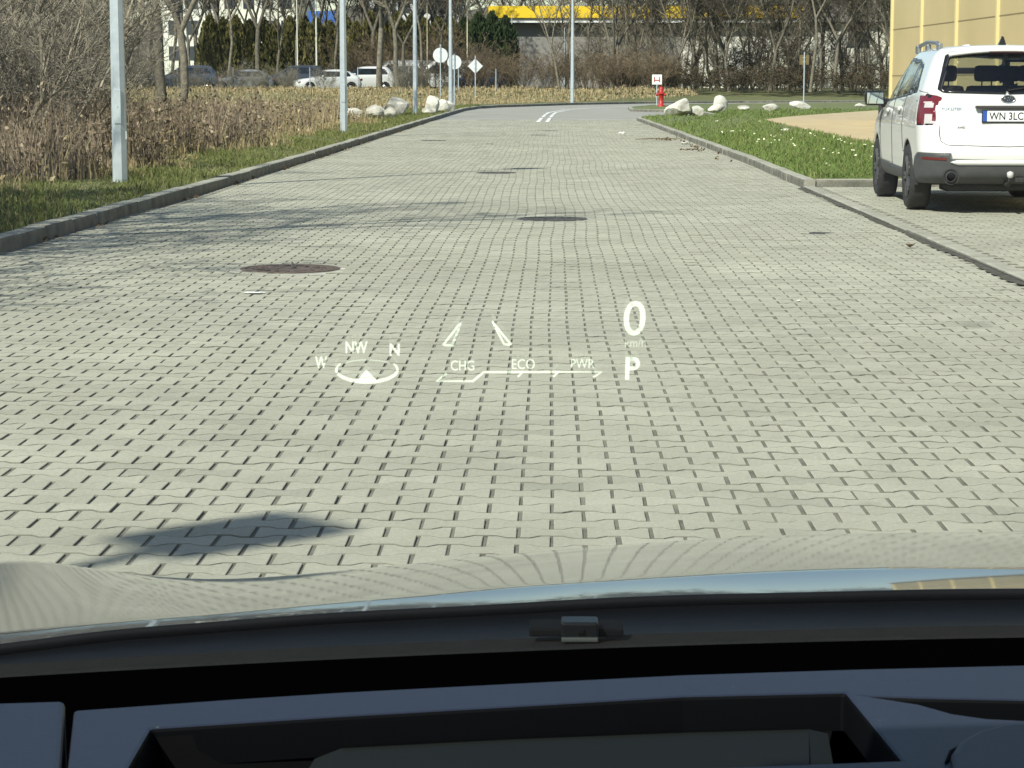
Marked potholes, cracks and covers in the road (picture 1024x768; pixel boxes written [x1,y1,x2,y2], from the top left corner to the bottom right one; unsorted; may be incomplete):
manhole cover [229,262,345,275]
